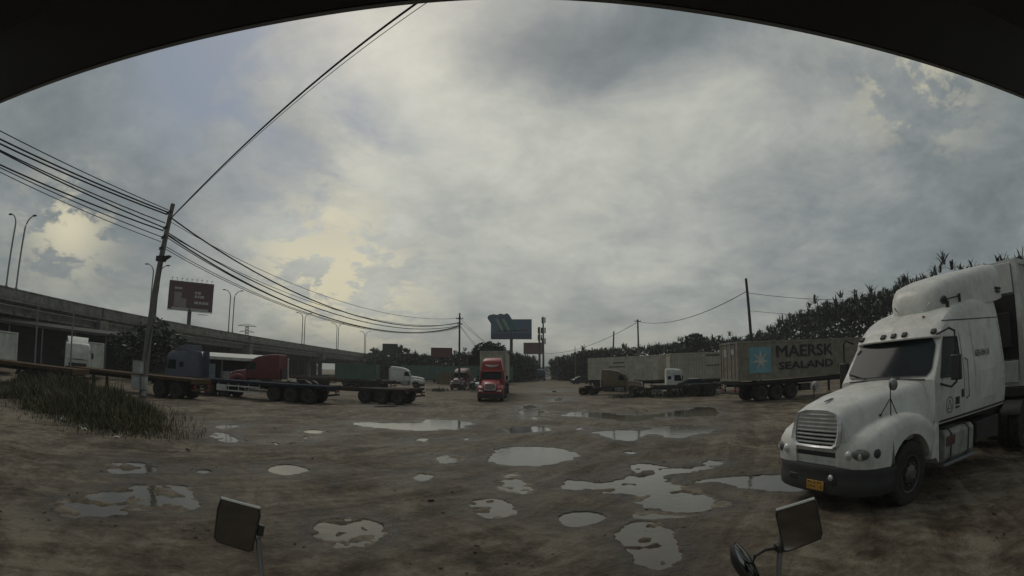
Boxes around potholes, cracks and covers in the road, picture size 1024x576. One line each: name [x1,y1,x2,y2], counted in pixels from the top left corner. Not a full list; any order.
pothole [49,483,203,519]
pothole [493,472,538,495]
pothole [310,517,390,548]
pothole [206,432,241,443]
pothole [468,497,518,519]
pothole [558,510,609,527]
pothole [483,446,583,466]
pothole [613,520,685,570]
pothole [267,464,310,475]
pothole [103,461,158,474]
pothole [589,424,717,441]
pothole [352,419,476,431]
